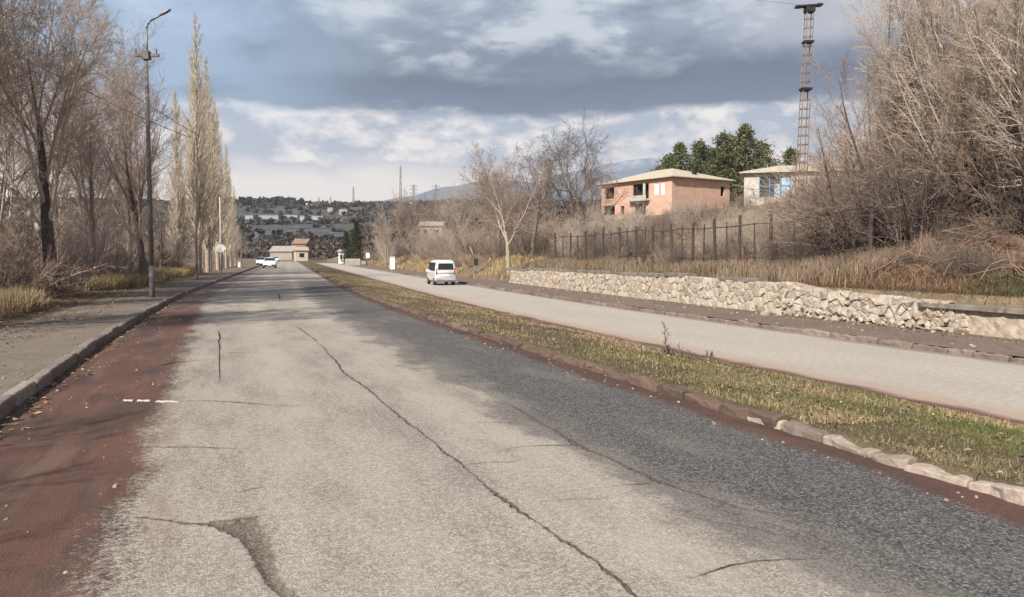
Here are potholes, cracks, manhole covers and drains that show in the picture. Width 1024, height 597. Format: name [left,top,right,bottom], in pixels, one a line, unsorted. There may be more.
crack [699,558,820,576]
crack [218,331,237,377]
crack [298,327,787,597]
crack [137,517,208,526]
